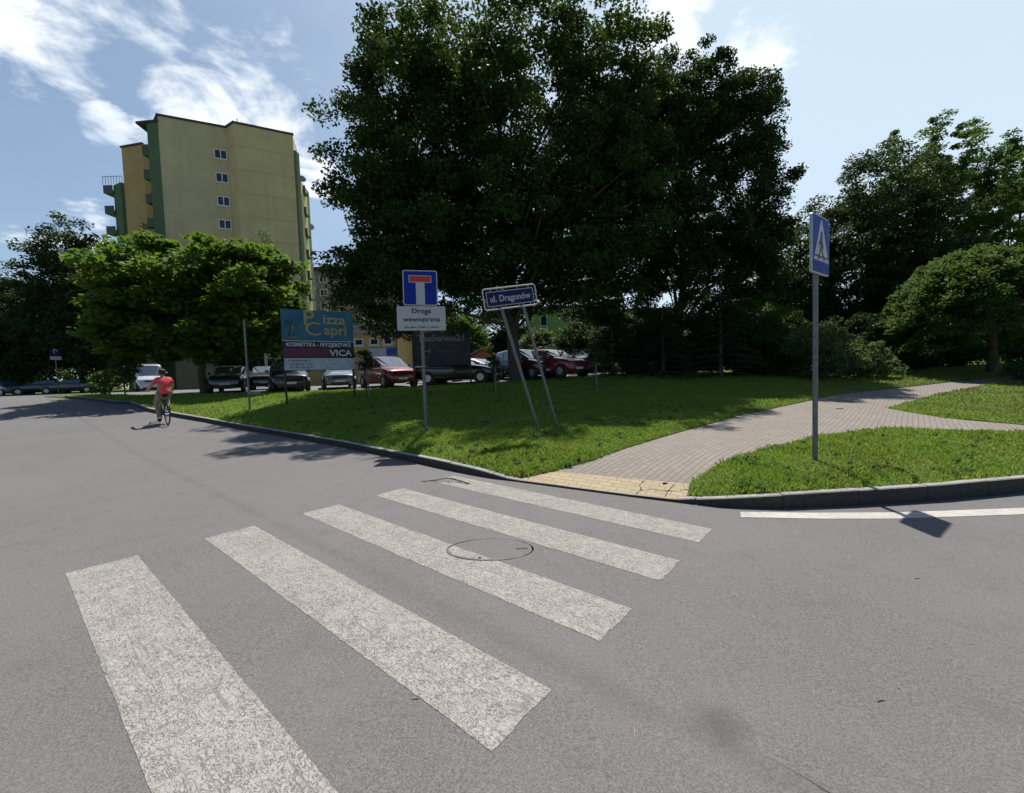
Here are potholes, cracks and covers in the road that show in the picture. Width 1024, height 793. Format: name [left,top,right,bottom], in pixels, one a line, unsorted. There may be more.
manhole cover [447,539,534,561]
